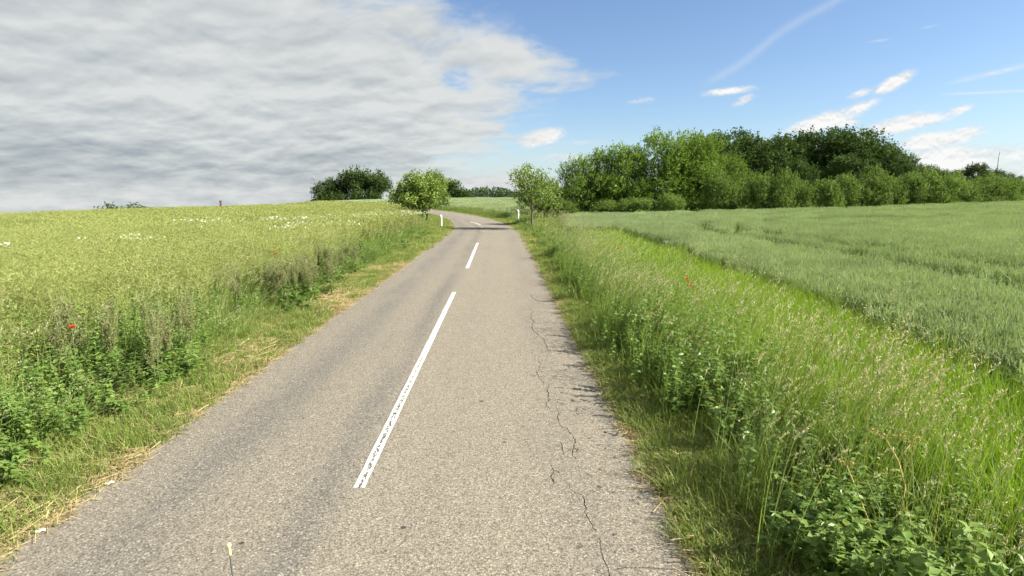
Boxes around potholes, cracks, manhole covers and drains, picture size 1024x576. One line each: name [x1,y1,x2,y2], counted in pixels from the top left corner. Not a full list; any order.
crack [530,296,610,576]
